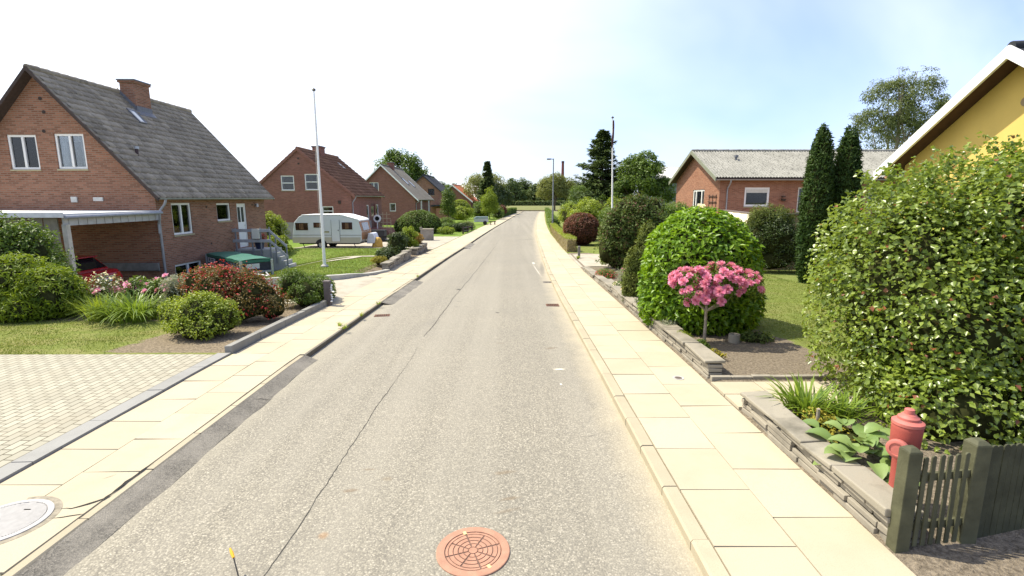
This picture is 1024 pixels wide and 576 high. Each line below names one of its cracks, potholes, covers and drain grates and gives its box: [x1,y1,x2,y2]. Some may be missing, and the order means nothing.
manhole cover [436,527,510,576]
crack [264,238,501,575]
